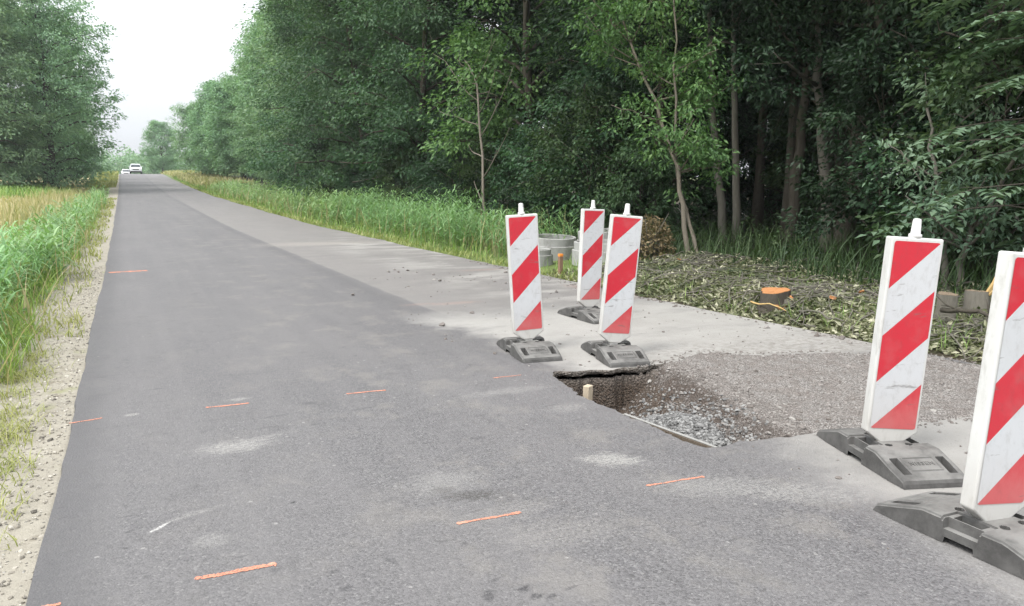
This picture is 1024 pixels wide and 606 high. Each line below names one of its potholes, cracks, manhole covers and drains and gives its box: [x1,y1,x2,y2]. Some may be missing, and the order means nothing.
pothole [553,361,814,447]
